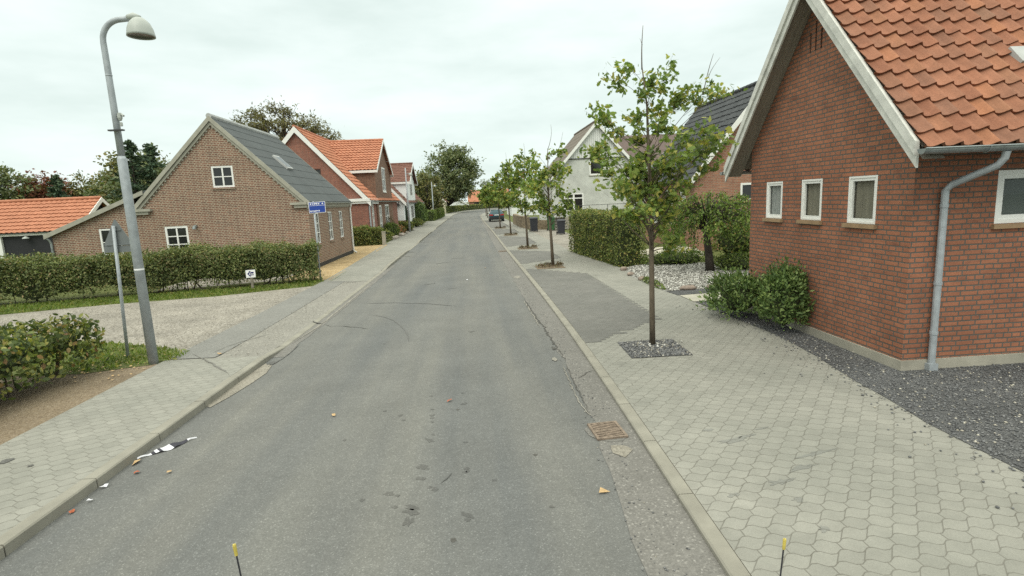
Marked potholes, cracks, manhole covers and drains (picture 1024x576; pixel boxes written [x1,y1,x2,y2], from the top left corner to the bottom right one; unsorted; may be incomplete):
crack [525,300,590,407]
drain grate [587,421,628,441]
